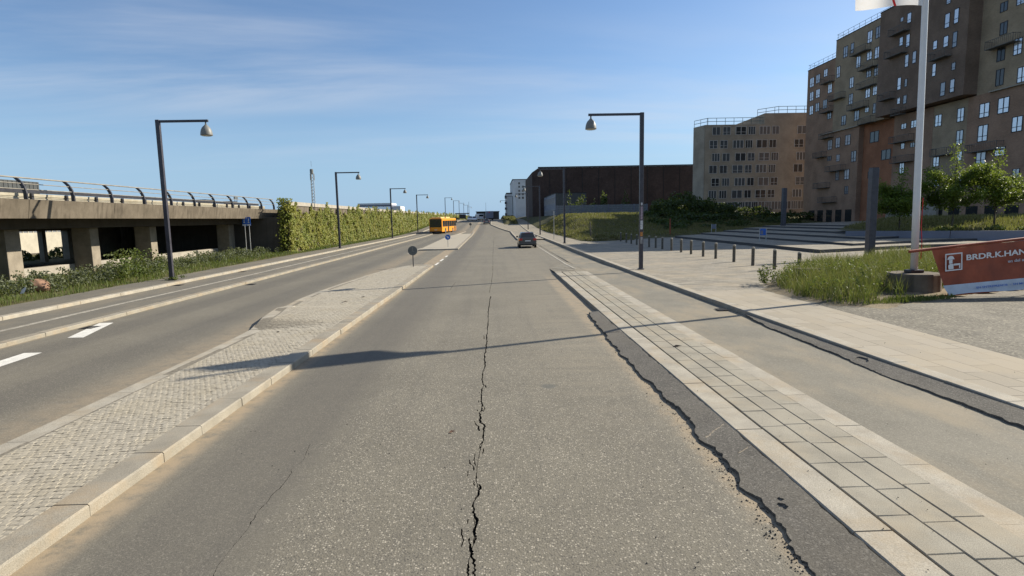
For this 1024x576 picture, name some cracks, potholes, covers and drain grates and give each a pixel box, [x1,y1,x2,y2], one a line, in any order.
crack [213,445,310,576]
crack [461,241,494,576]
